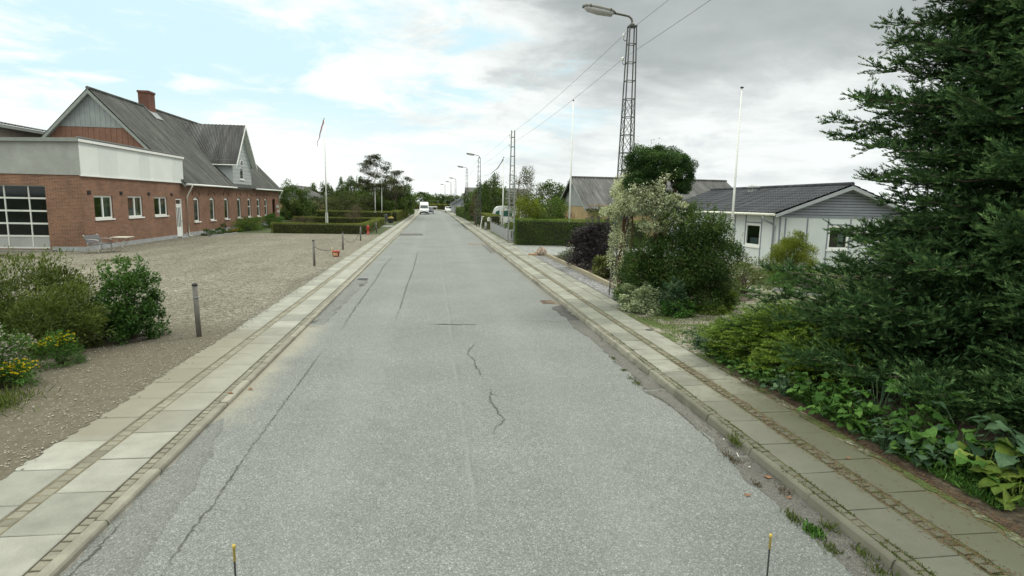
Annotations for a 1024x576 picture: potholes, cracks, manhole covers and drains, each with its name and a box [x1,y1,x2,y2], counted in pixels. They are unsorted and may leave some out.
crack [161,352,321,576]
crack [468,344,505,432]
